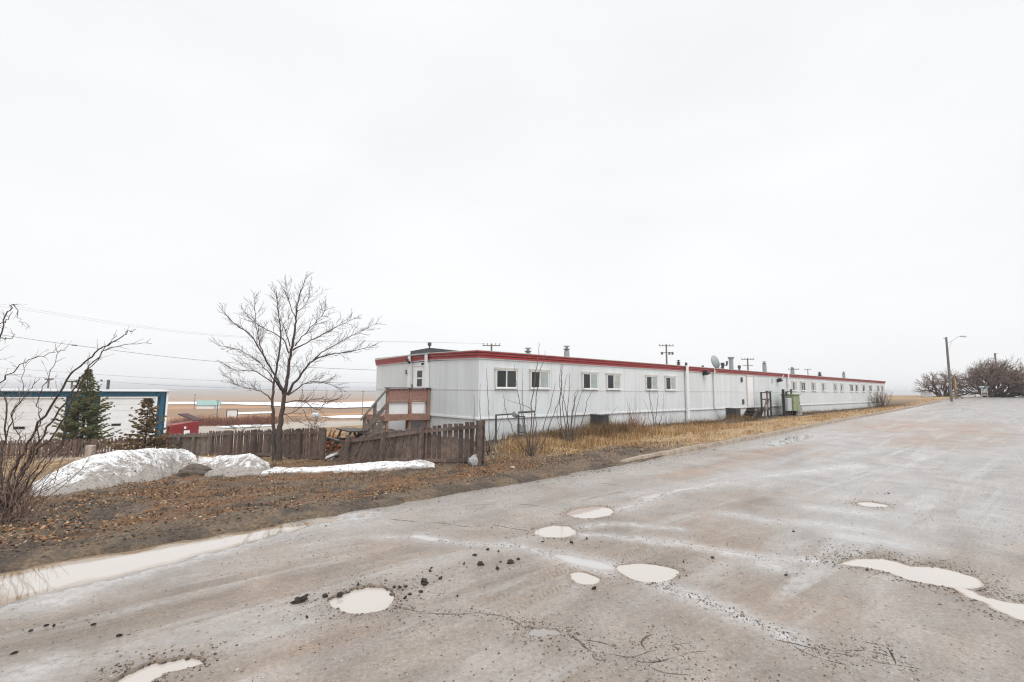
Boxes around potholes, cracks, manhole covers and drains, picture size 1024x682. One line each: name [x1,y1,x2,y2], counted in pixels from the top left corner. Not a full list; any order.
crack [567,582,929,675]
pothole [109,655,207,682]
pothole [941,585,1024,620]
crack [394,607,526,629]
pothole [533,525,578,537]
pothole [569,571,601,585]
pothole [326,583,399,616]
pothole [837,557,985,589]
pothole [615,563,680,583]
pothole [565,506,614,519]
pothole [528,627,563,636]
